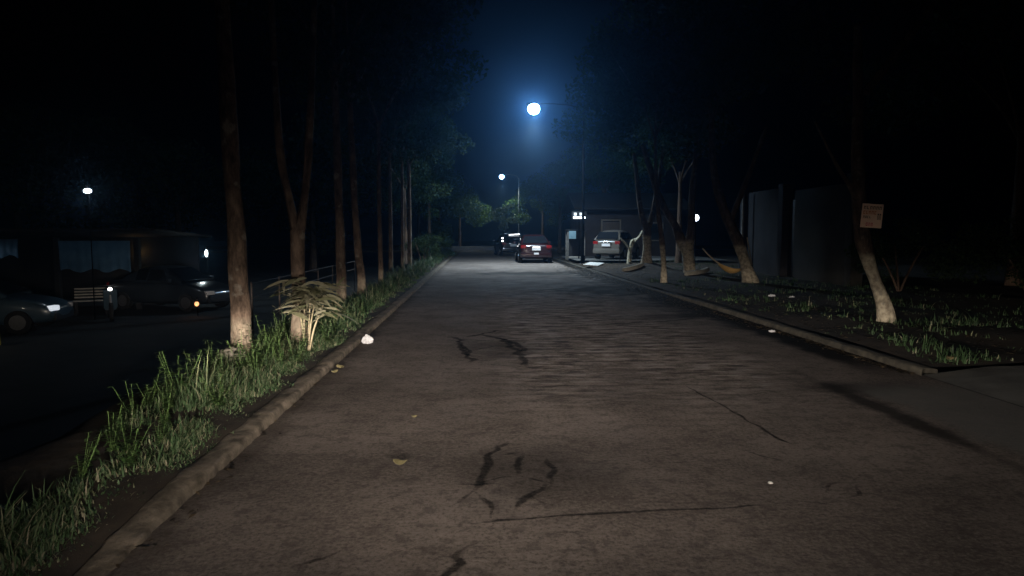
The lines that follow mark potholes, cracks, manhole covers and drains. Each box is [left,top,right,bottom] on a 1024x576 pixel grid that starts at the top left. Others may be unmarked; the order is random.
crack [690,388,787,457]
crack [453,319,684,365]
crack [463,444,755,523]
crack [442,552,466,576]
